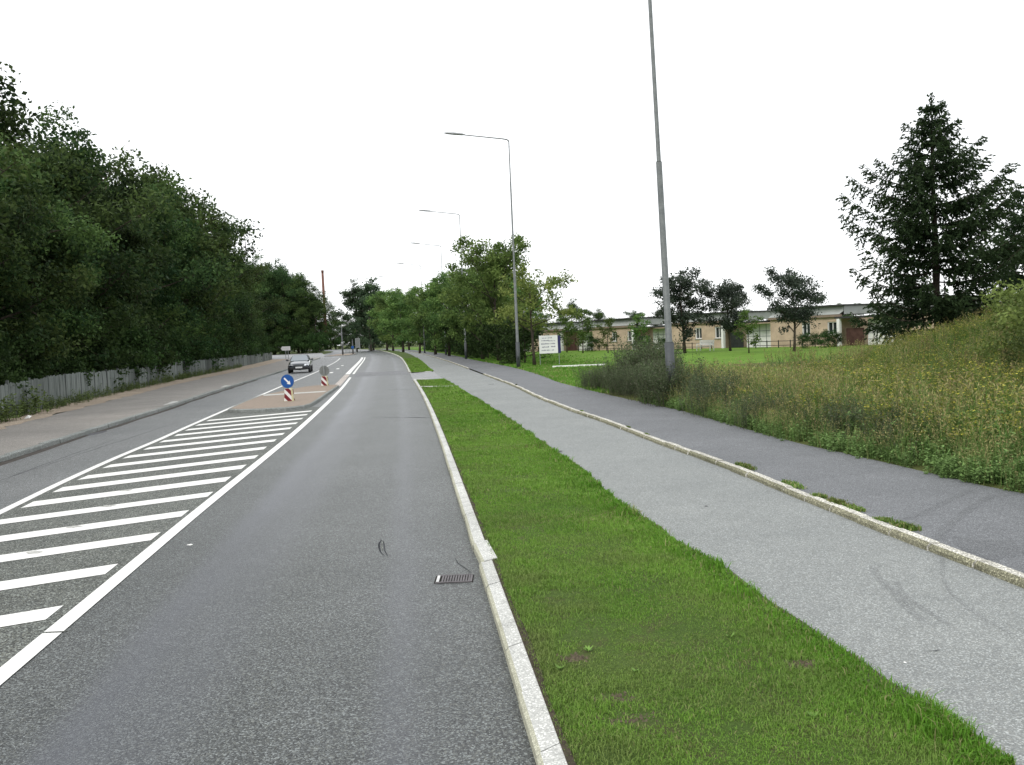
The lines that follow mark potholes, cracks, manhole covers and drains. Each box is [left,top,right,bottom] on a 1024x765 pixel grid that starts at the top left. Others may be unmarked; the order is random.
drain grate [434,574,474,584]
